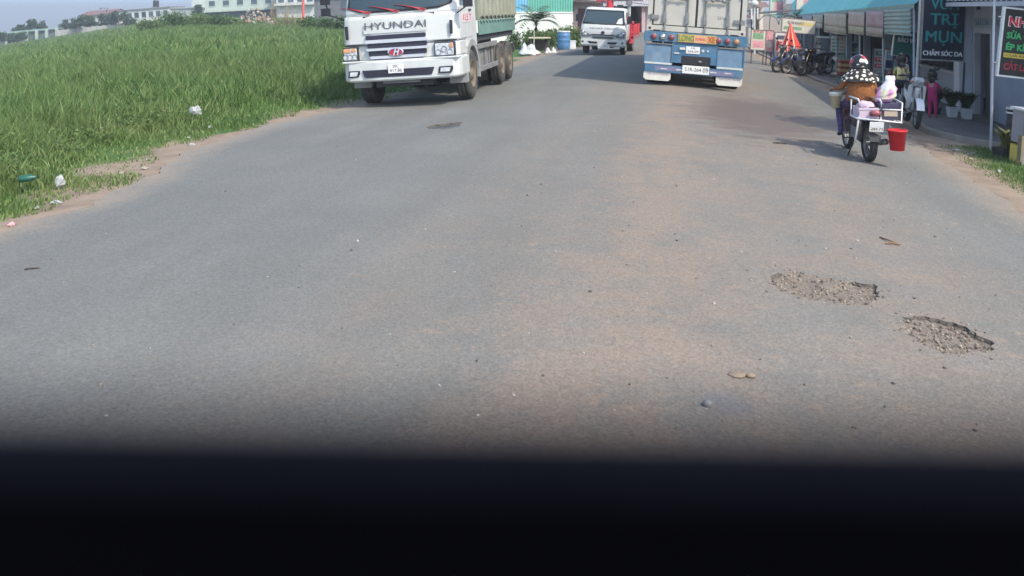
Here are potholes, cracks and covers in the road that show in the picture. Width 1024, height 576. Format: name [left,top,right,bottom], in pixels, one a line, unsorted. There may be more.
pothole [888,310,1003,363]
pothole [746,265,890,309]
